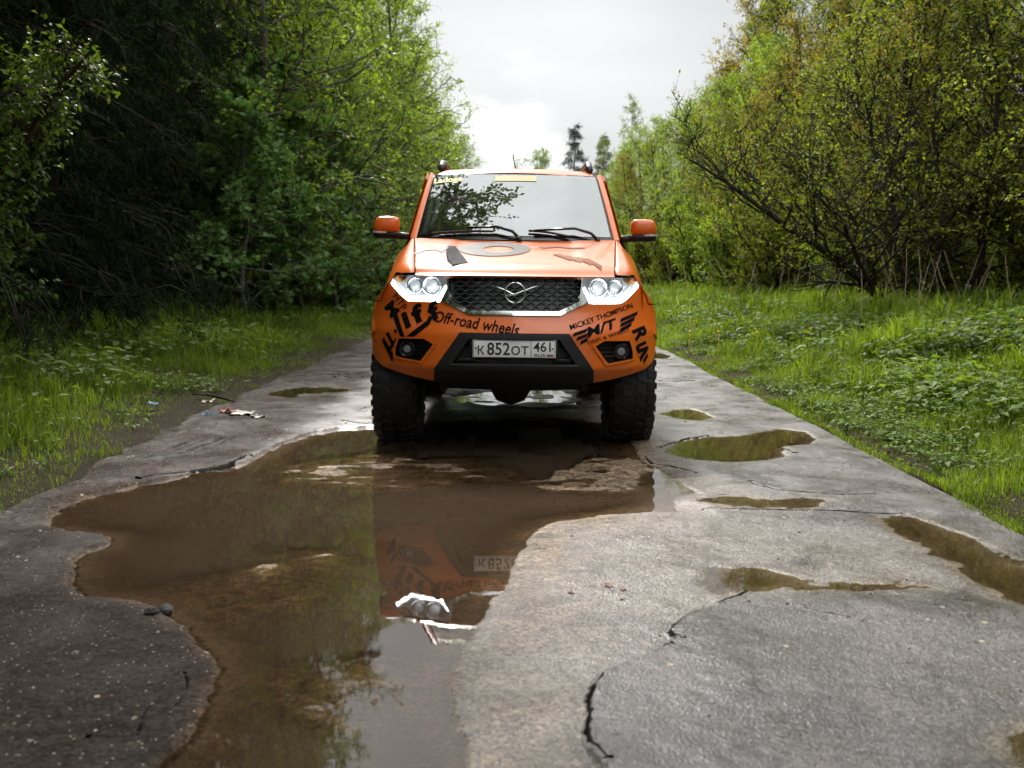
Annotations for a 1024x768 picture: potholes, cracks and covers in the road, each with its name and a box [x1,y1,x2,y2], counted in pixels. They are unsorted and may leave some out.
pothole [876,516,1024,605]
crack [747,481,874,496]
pothole [661,428,818,462]
pothole [705,495,825,508]
pothole [45,417,713,768]
pothole [694,565,934,595]
